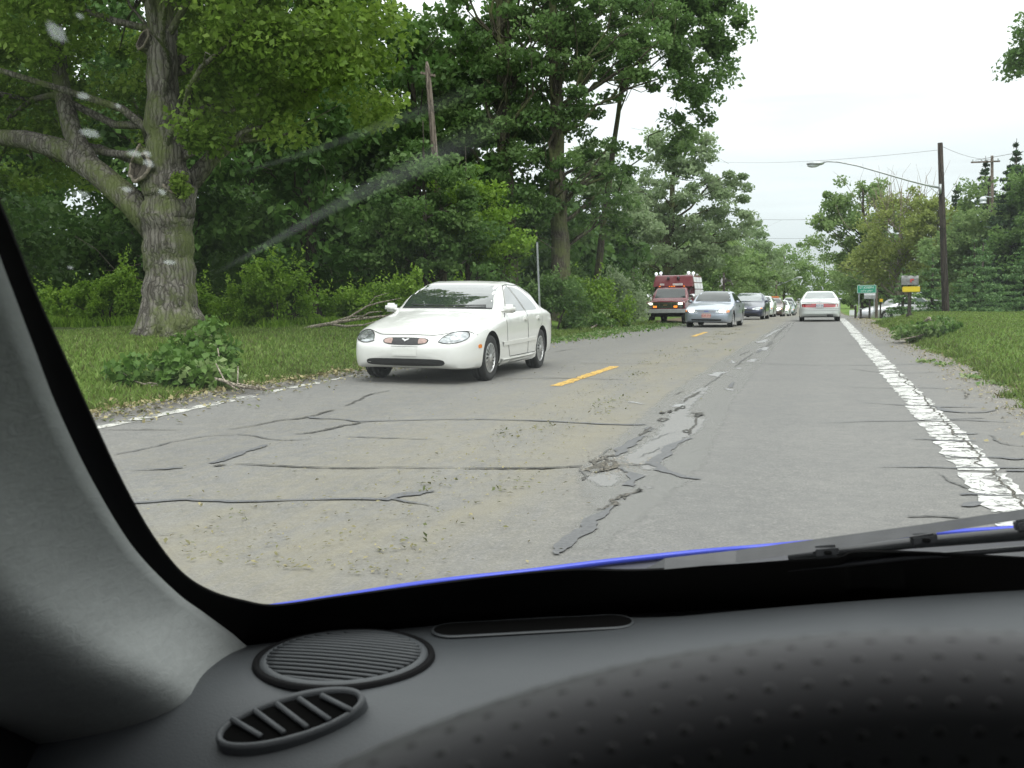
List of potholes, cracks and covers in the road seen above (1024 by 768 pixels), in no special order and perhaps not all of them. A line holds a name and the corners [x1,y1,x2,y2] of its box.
crack [113,390,432,470]
crack [462,419,668,480]
crack [597,491,636,509]
crack [674,391,702,435]
